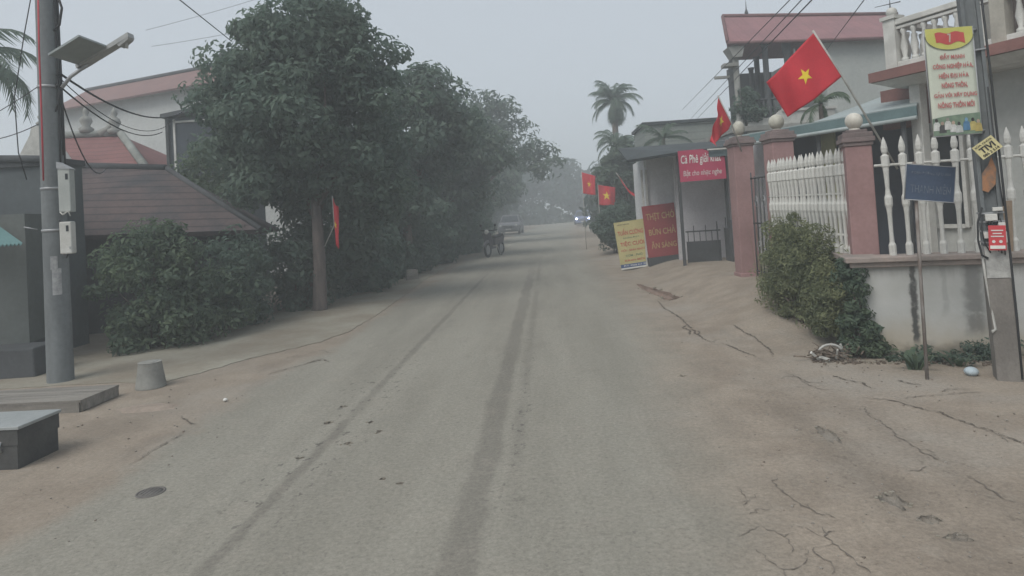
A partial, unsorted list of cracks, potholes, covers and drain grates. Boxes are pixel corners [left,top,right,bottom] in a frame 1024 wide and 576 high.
pothole [916,515,943,525]
pothole [936,532,974,542]
crack [660,303,774,357]
pothole [634,283,683,301]
crack [736,478,871,576]
manhole cover [135,486,166,499]
pothole [874,491,913,511]
crack [783,375,1024,471]
